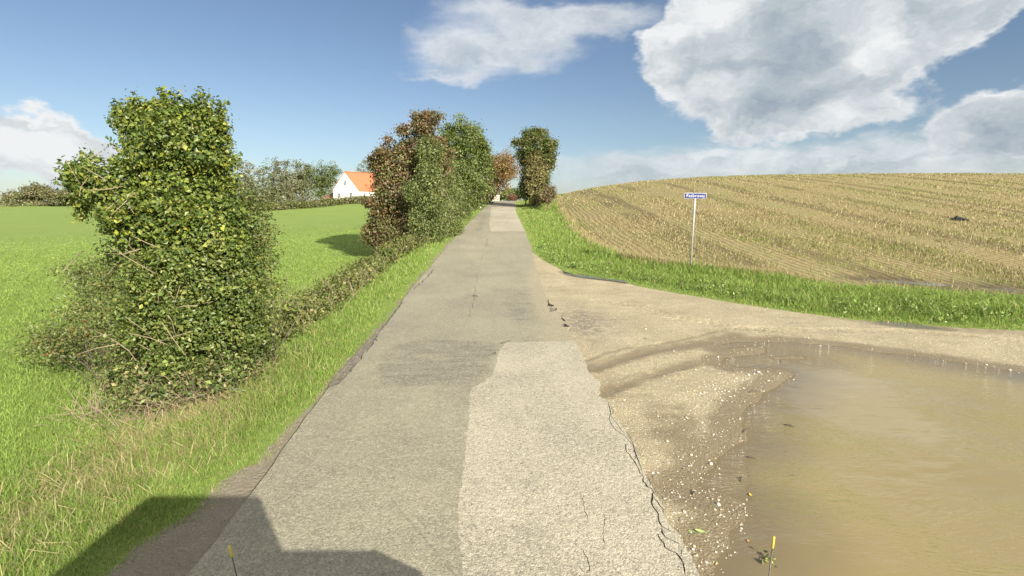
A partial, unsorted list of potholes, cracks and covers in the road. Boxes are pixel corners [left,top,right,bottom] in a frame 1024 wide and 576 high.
crack [608,403,696,576]
